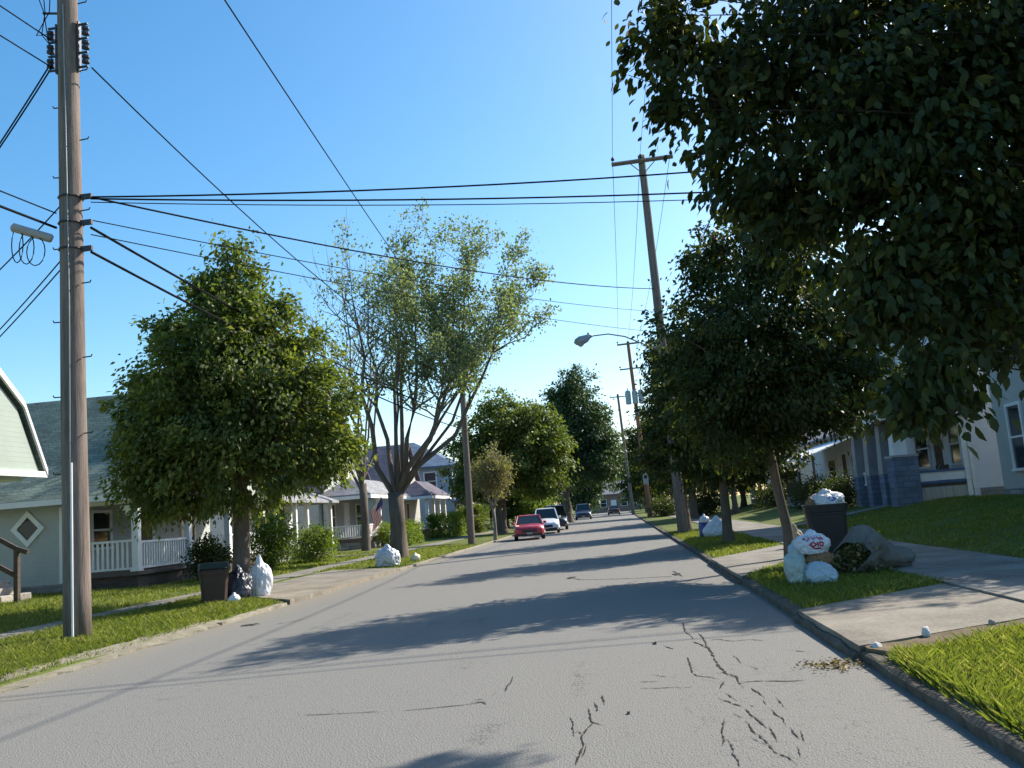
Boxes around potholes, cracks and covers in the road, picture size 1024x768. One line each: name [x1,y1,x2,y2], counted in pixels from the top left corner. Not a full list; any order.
crack [403,677,513,711]
crack [570,695,605,763]
crack [642,623,801,766]
